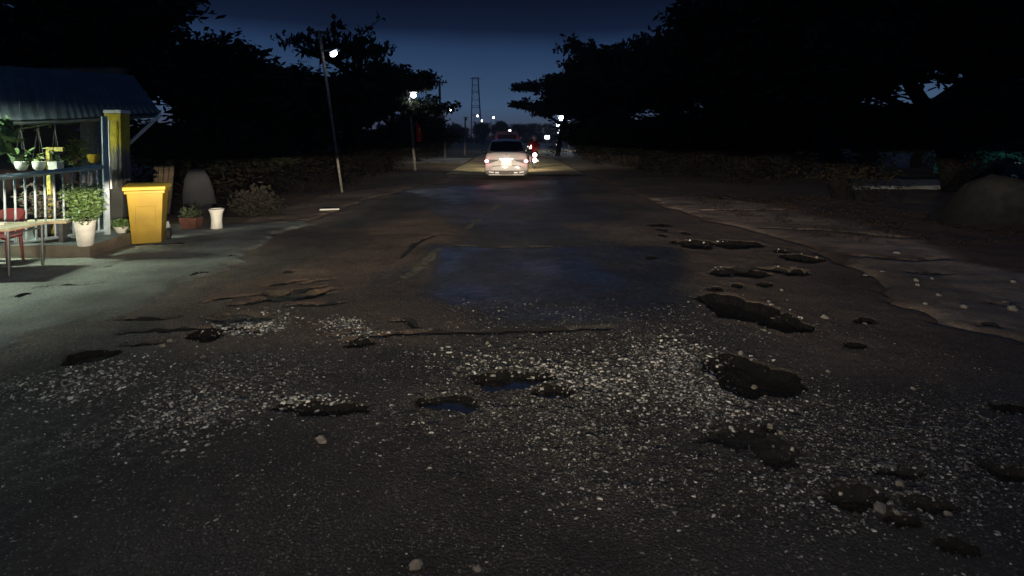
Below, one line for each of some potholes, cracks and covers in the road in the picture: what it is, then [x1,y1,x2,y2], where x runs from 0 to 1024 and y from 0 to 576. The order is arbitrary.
pothole [694,293,781,330]
pothole [467,369,557,392]
pothole [412,395,479,414]
pothole [678,240,717,250]
pothole [701,354,809,400]
pothole [269,401,370,417]
crack [350,319,605,343]
pothole [61,350,122,366]
pothole [715,240,764,250]
pothole [822,481,889,514]
pothole [760,269,812,277]
